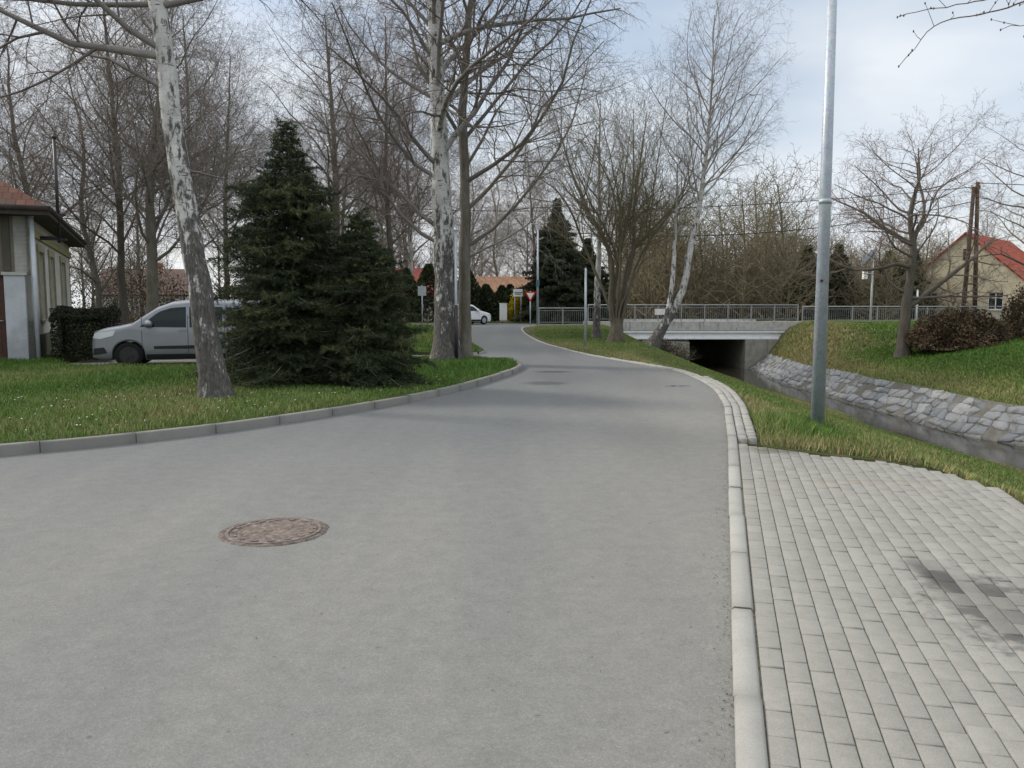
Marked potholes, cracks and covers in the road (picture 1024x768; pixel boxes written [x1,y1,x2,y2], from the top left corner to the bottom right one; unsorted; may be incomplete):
manhole cover [218,517,330,547]
